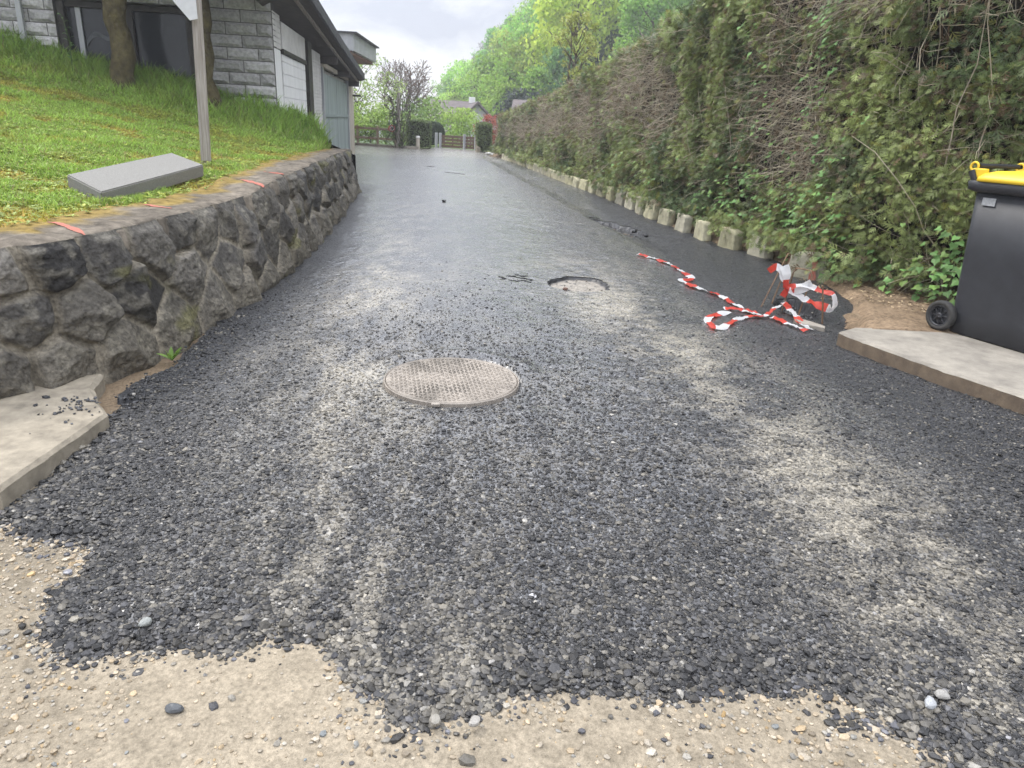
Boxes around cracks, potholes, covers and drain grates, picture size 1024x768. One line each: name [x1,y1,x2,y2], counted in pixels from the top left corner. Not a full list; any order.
pothole [547,276,610,292]
pothole [589,217,644,240]
manhole cover [383,357,519,408]
